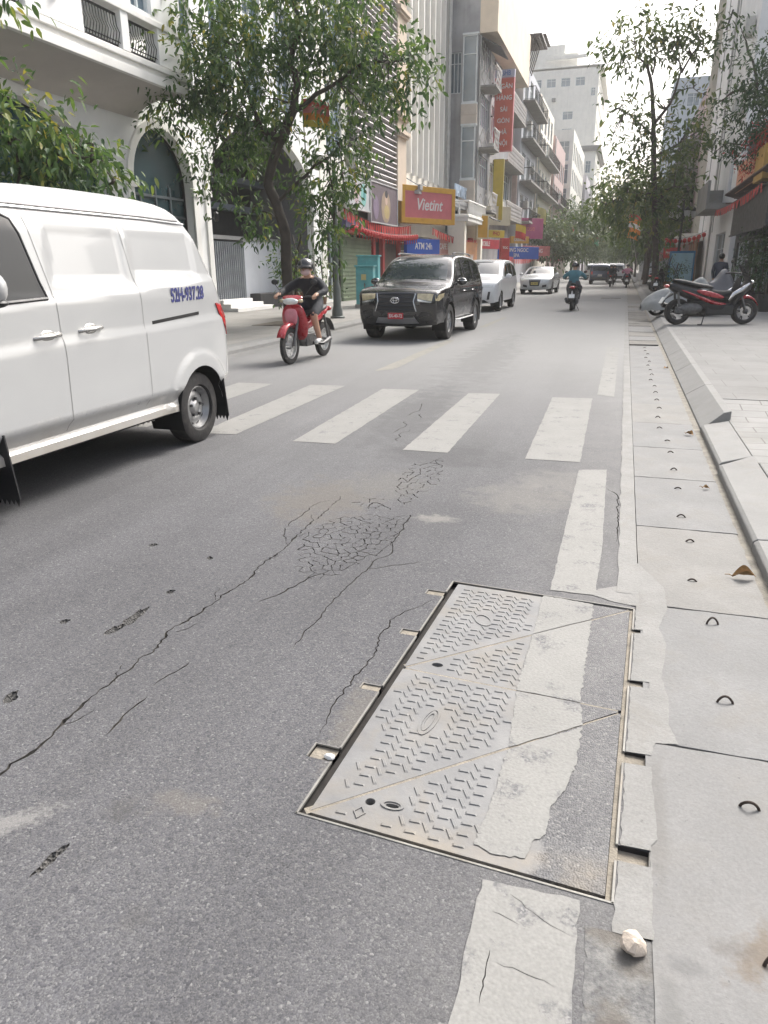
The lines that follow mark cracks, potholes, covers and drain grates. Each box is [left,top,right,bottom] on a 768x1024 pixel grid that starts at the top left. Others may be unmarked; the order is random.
pothole [29,844,69,878]
manhole cover [295,581,650,905]
crack [0,458,443,776]
